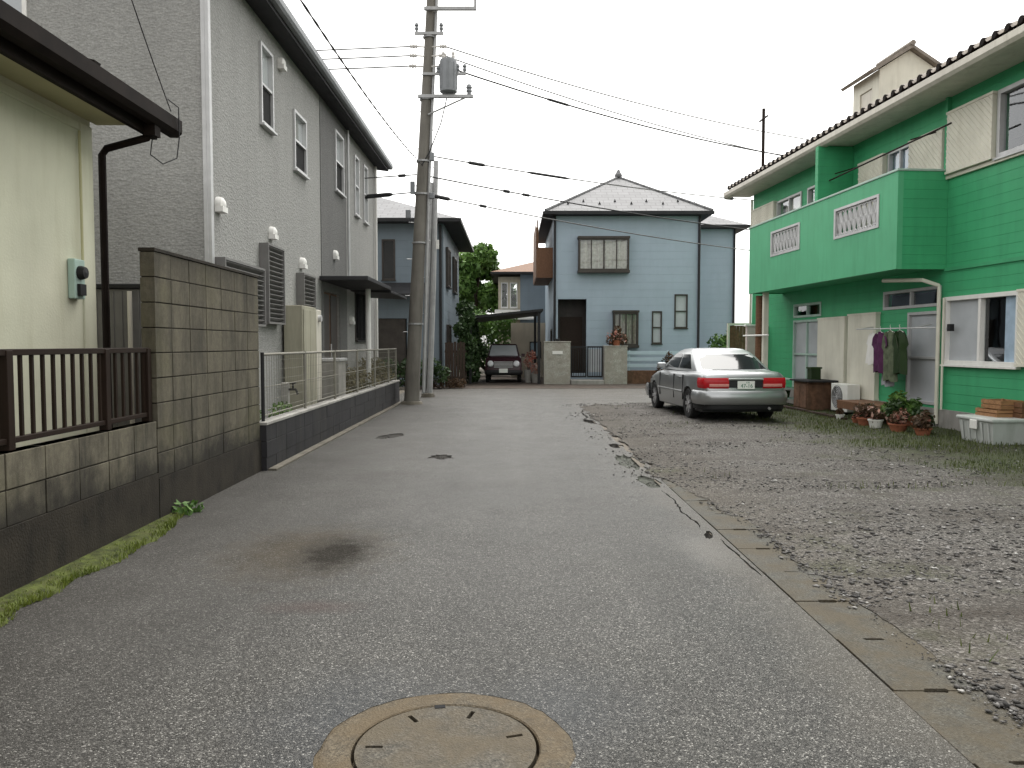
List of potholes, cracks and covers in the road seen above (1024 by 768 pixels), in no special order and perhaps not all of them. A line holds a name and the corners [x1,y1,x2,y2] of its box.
pothole [637,475,662,488]
crack [662,491,700,528]
pothole [616,454,645,470]
manhole cover [313,693,576,768]
crack [722,540,762,576]
